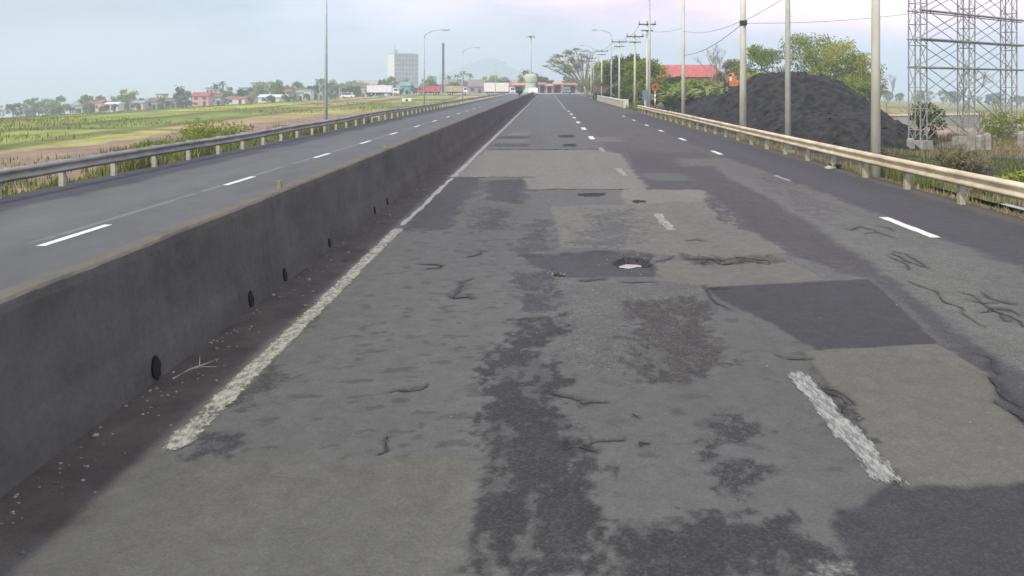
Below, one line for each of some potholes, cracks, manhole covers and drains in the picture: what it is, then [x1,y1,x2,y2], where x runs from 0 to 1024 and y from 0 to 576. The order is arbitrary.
crack [657,240,772,265]
crack [555,394,606,404]
crack [566,413,649,452]
pothole [611,257,654,269]
crack [987,357,1024,420]
crack [853,227,1024,327]
crack [422,251,483,299]
